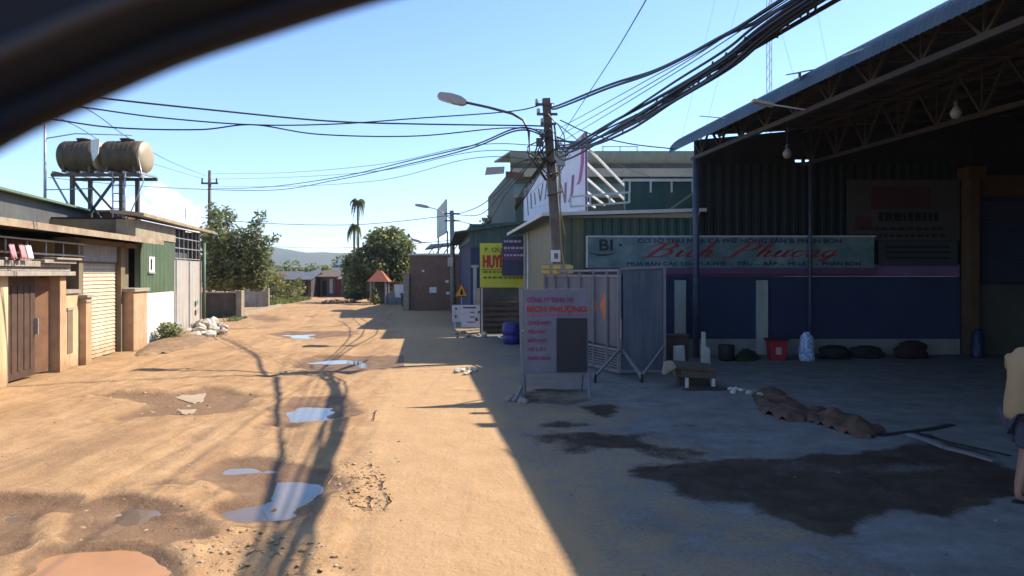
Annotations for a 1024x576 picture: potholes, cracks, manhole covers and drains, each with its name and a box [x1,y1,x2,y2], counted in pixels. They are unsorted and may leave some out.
pothole [0,537,204,576]
pothole [76,383,284,424]
pothole [243,392,373,430]
pothole [282,353,404,375]
pothole [185,451,365,527]
pothole [251,329,367,341]
pothole [44,488,233,546]
